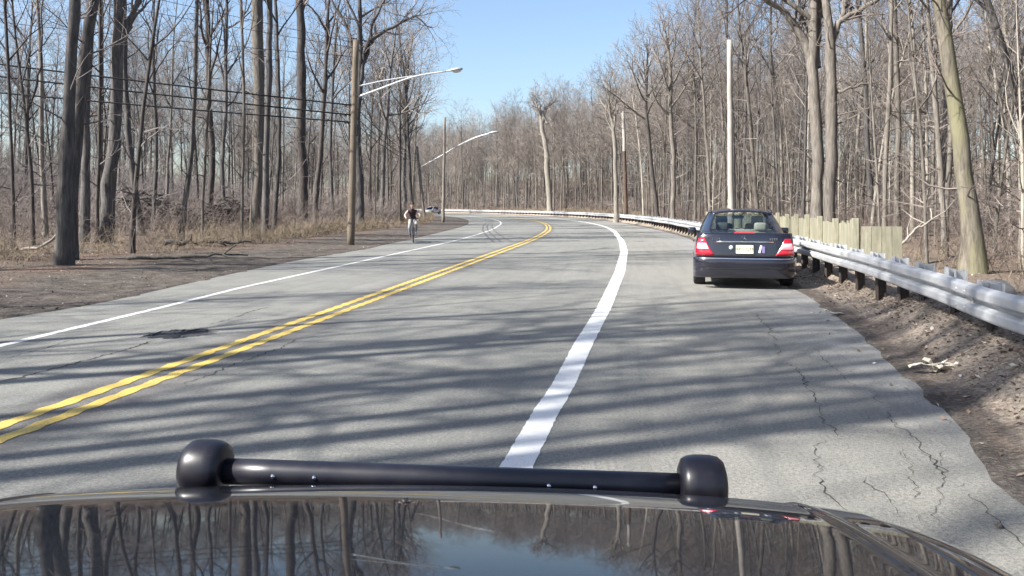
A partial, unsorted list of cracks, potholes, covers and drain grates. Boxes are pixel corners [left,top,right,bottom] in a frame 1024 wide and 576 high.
crack [188,339,296,382]
crack [864,393,1023,545]
pothole [142,328,218,339]
crack [757,314,856,511]
